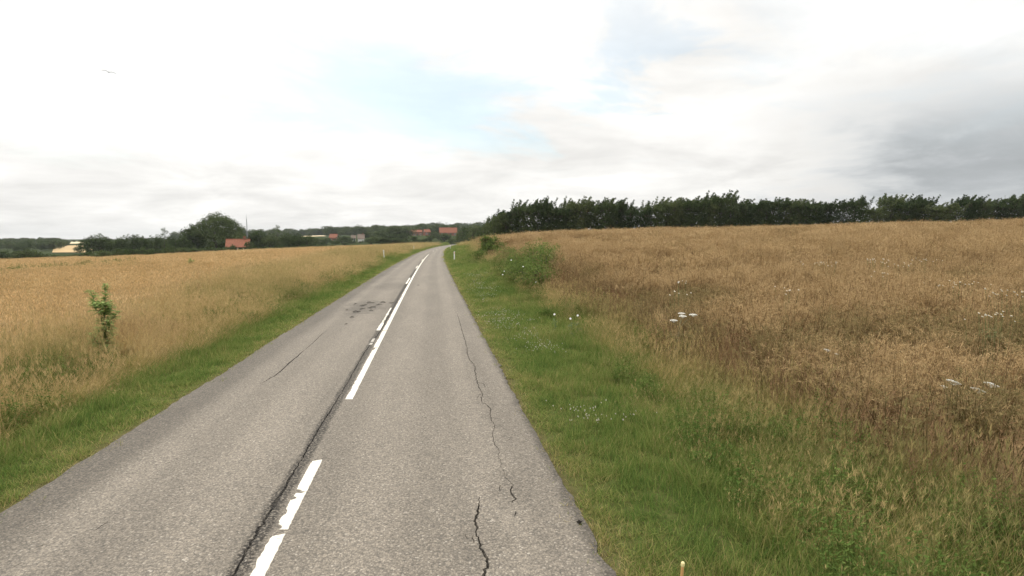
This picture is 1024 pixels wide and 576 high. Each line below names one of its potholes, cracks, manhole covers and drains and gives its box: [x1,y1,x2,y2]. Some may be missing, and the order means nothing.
crack [262,331,326,383]
crack [457,315,517,576]
